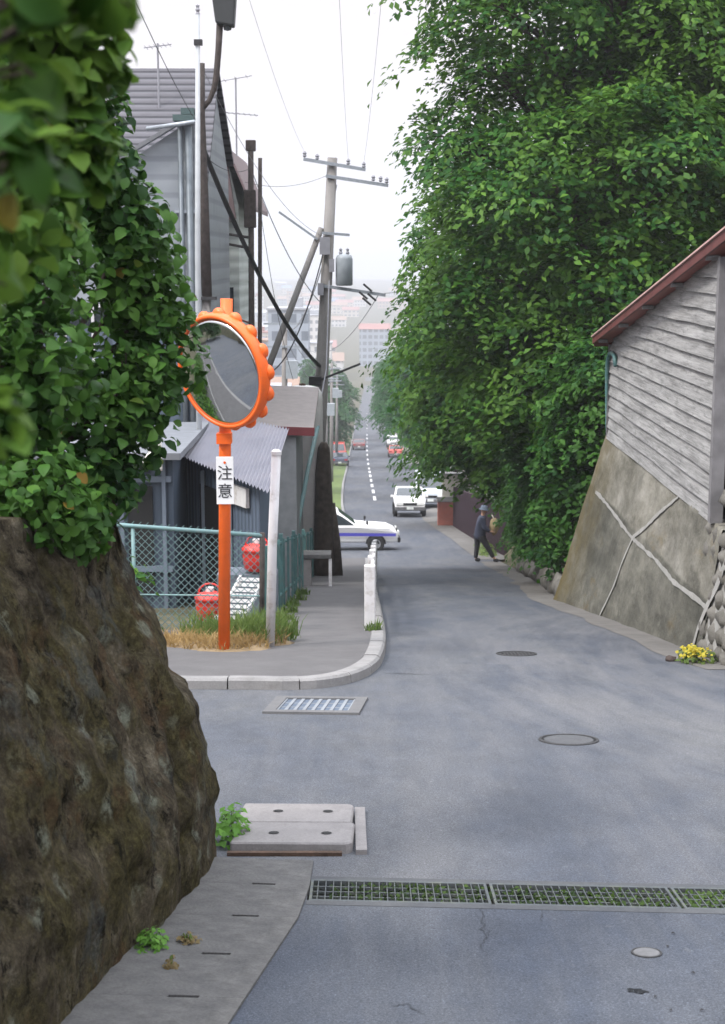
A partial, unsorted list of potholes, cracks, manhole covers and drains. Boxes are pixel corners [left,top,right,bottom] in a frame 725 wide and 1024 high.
utility cover [631,947,662,958]
drain grate [489,883,681,908]
crack [479,908,493,956]
drain grate [309,879,492,904]
drain grate [262,696,368,715]
drain grate [670,887,725,909]
manhole cover [538,734,599,746]
